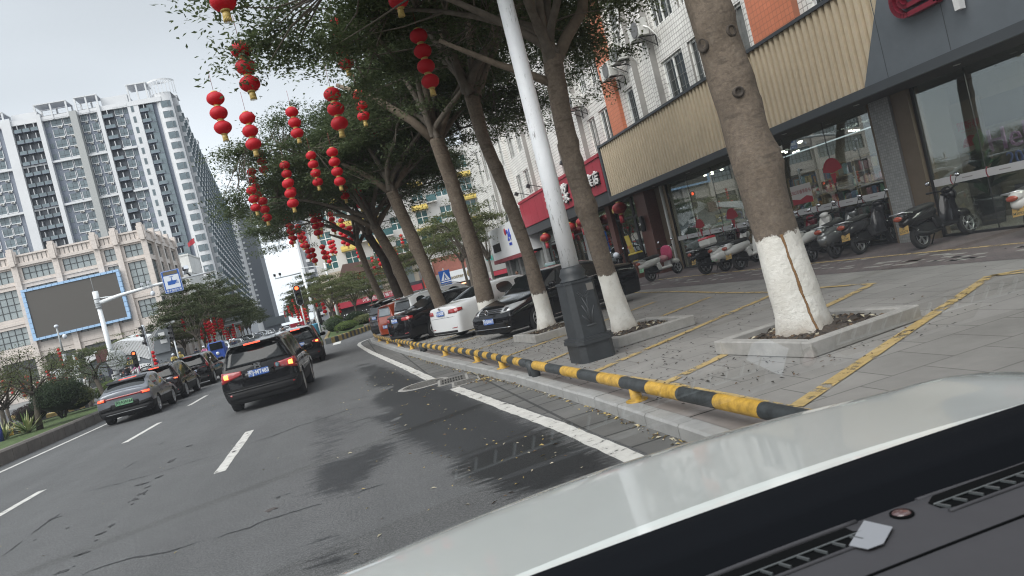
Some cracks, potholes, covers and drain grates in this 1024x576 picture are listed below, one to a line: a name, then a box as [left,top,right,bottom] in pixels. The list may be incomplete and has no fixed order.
crack [84,541,200,574]
crack [217,493,322,538]
drain grate [452,376,481,388]
drain grate [438,373,468,387]
